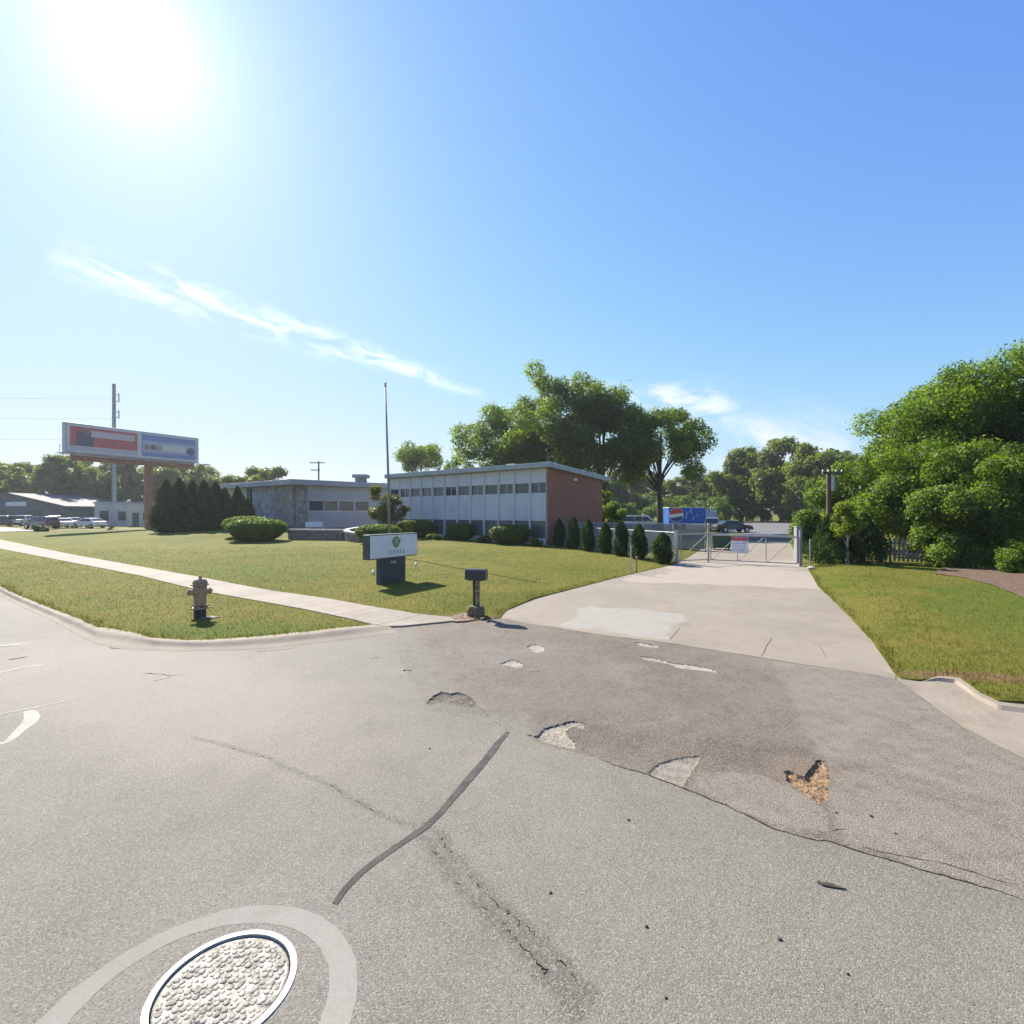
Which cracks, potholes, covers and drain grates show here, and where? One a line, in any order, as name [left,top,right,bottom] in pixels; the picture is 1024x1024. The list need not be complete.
crack [211,711,577,980]
pothole [526,721,586,749]
pothole [426,691,477,708]
pothole [648,755,702,788]
pothole [527,644,545,653]
pothole [784,760,830,803]
crack [600,759,1023,900]
pothole [500,660,524,668]
